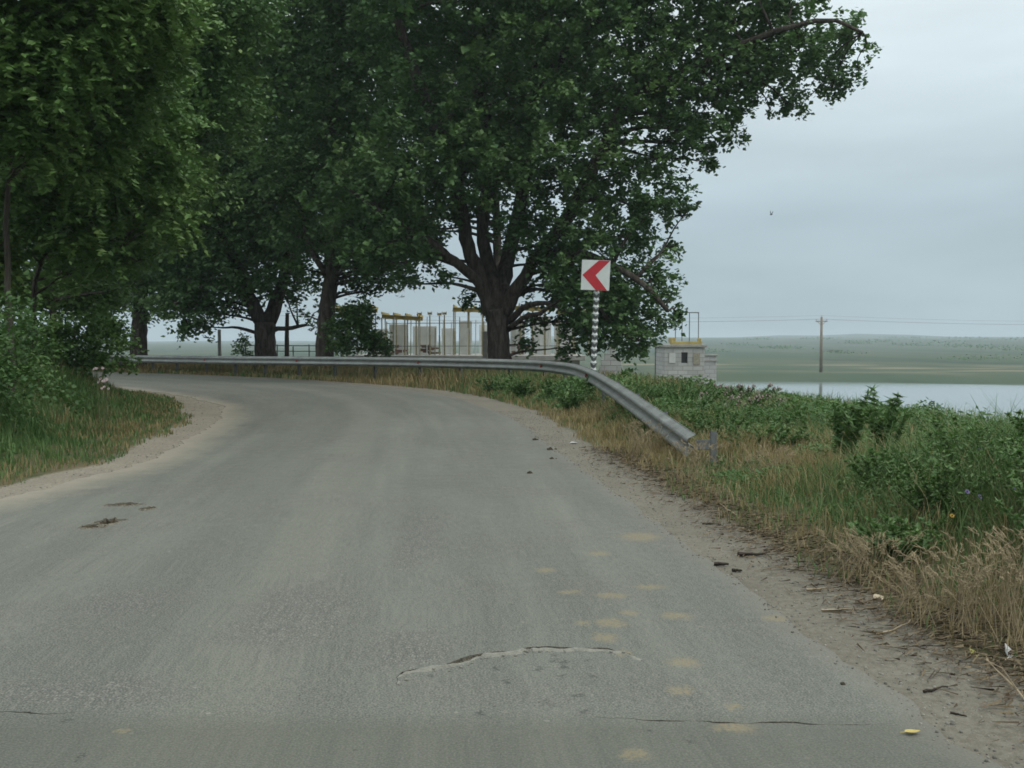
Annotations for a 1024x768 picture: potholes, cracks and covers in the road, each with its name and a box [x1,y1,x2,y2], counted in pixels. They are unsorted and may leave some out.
crack [396,646,643,684]
crack [600,717,884,725]
pothole [91,517,128,527]
